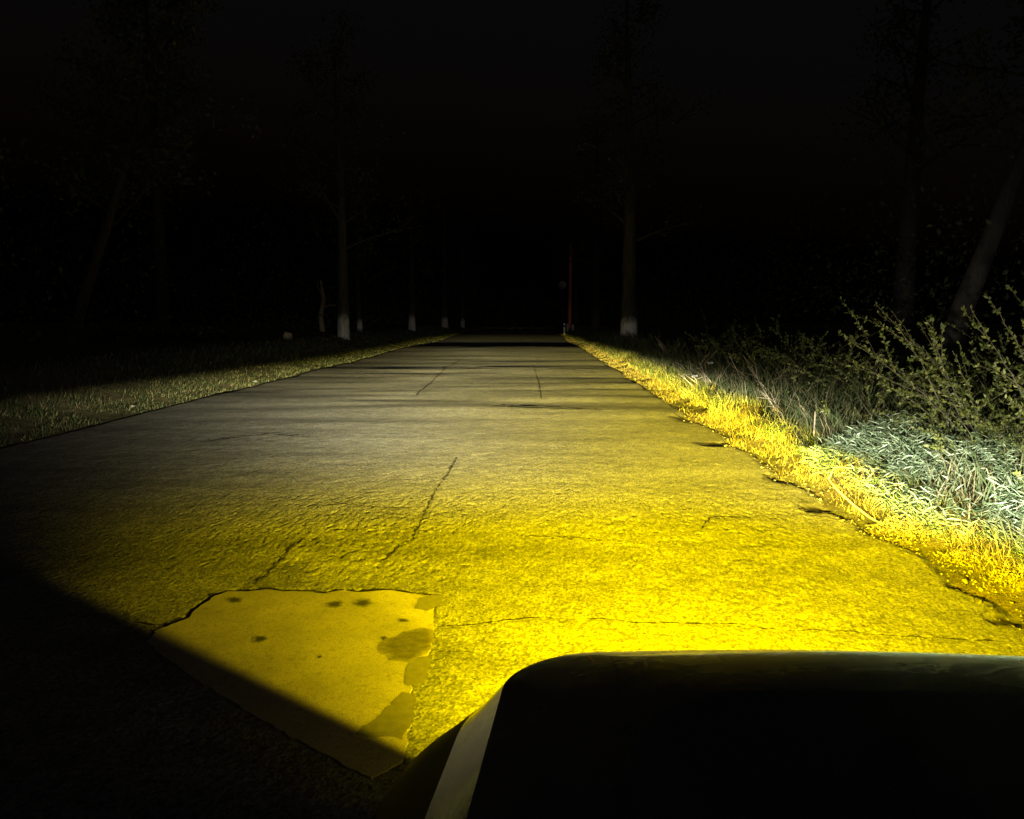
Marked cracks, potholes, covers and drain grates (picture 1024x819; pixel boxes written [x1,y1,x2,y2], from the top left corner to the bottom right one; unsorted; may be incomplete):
crack [439,617,1005,642]
crack [135,539,431,625]
crack [507,366,603,409]
crack [386,458,457,557]
